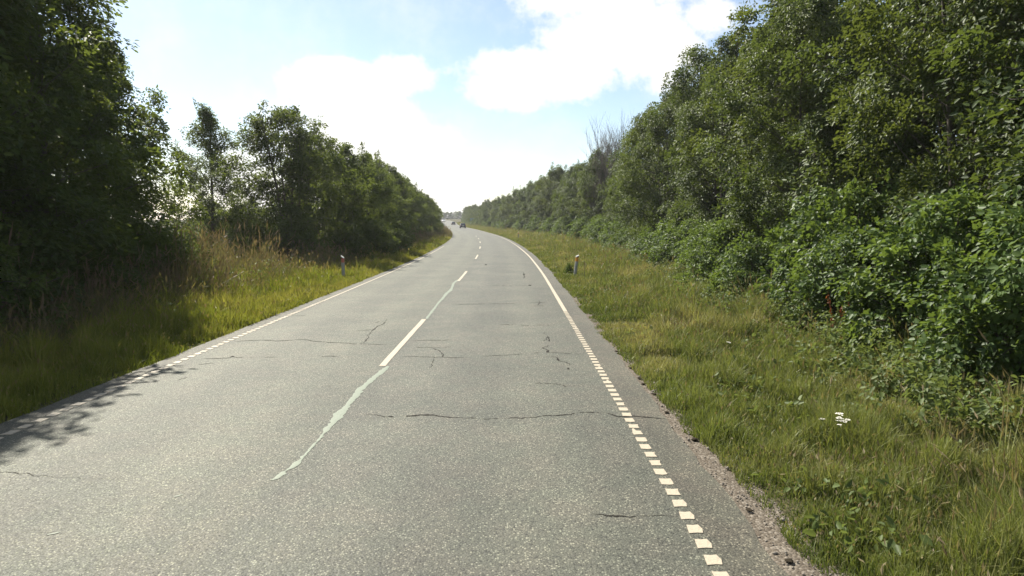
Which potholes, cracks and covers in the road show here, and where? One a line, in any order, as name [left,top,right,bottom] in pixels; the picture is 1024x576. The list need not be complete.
crack [179,319,669,480]
